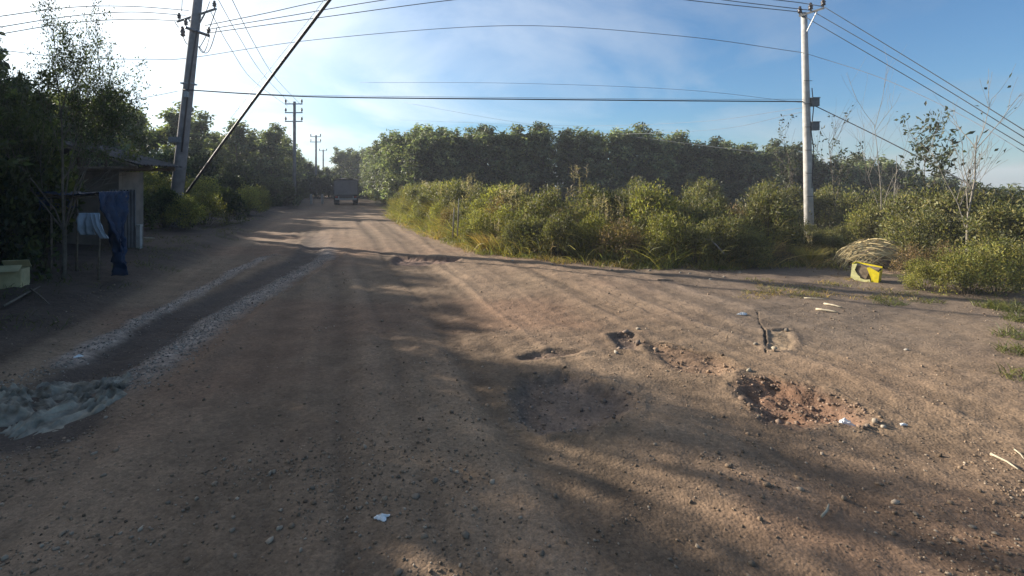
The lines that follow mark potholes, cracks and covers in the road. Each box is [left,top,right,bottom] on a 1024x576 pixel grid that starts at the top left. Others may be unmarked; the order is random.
pothole [602,330,647,351]
pothole [719,371,891,435]
pothole [508,346,594,362]
pothole [761,327,800,352]
